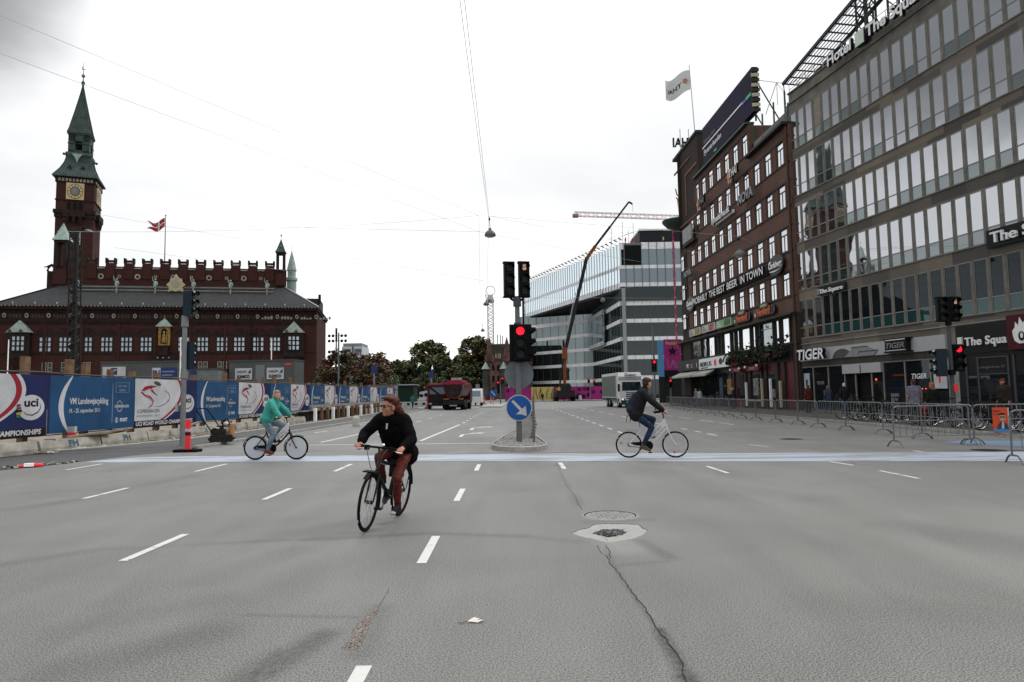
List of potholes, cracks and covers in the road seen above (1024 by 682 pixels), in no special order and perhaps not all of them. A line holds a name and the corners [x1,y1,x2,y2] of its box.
manhole cover [581,510,639,520]
crack [341,589,389,651]
crack [597,545,687,682]
